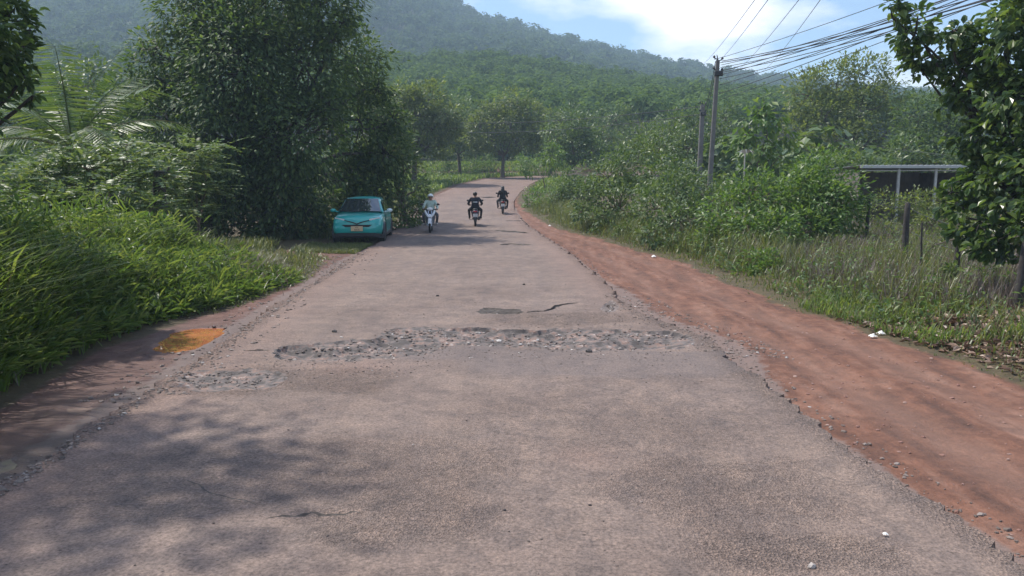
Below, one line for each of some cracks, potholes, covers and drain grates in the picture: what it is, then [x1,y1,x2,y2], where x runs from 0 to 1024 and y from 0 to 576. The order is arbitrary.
pothole [176,368,288,392]
crack [181,479,361,519]
pothole [271,326,696,362]
crack [526,303,575,313]
